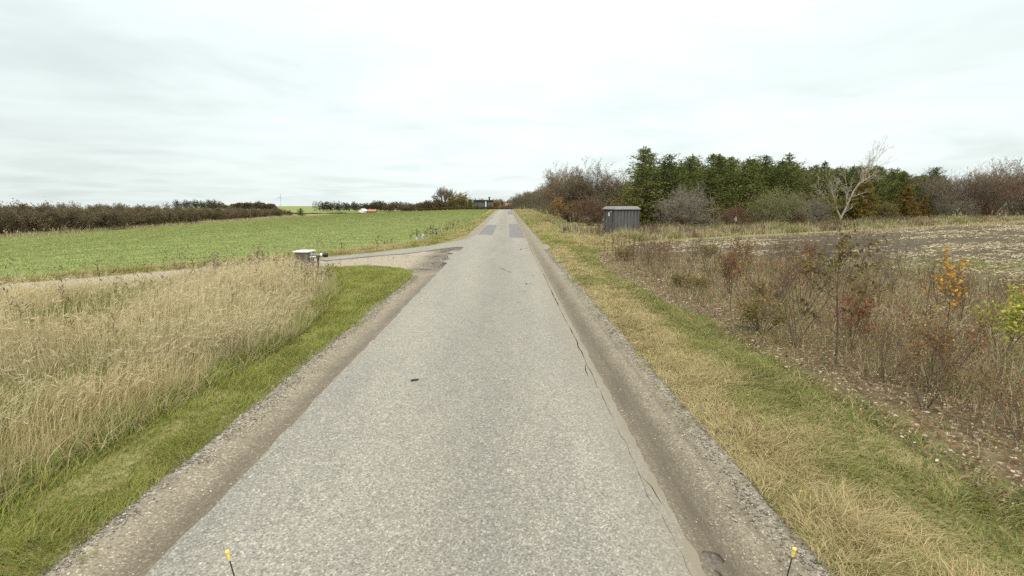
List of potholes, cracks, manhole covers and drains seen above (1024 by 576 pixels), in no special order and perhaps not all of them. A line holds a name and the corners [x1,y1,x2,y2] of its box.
crack [520,244,691,574]
pothole [702,550,725,565]
